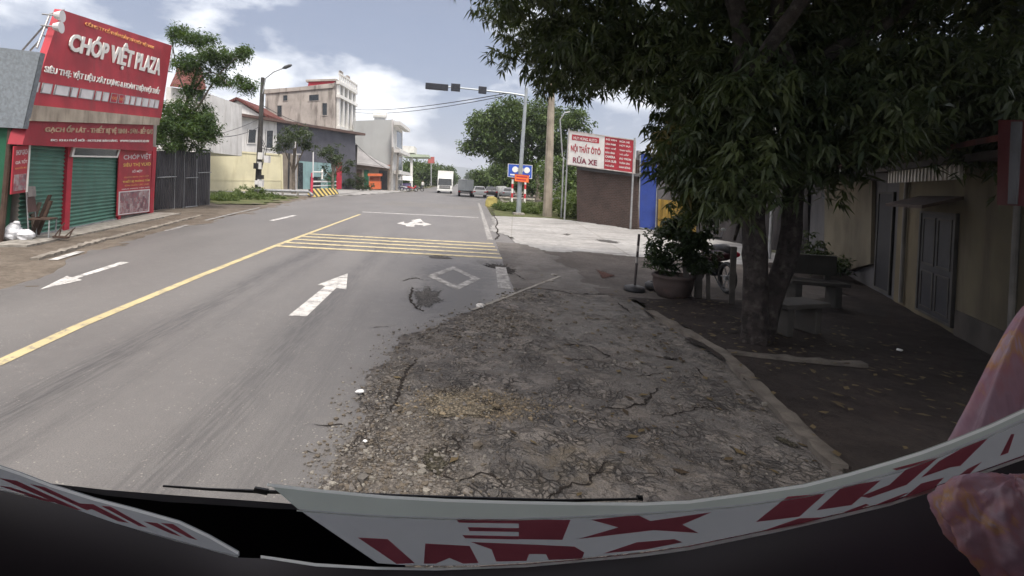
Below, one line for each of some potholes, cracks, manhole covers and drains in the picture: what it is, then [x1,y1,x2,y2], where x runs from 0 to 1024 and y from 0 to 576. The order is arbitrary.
crack [424,463,509,487]
crack [443,436,461,453]
crack [569,344,708,416]
crack [548,460,608,499]
pothole [411,286,444,308]
crack [390,359,416,412]
